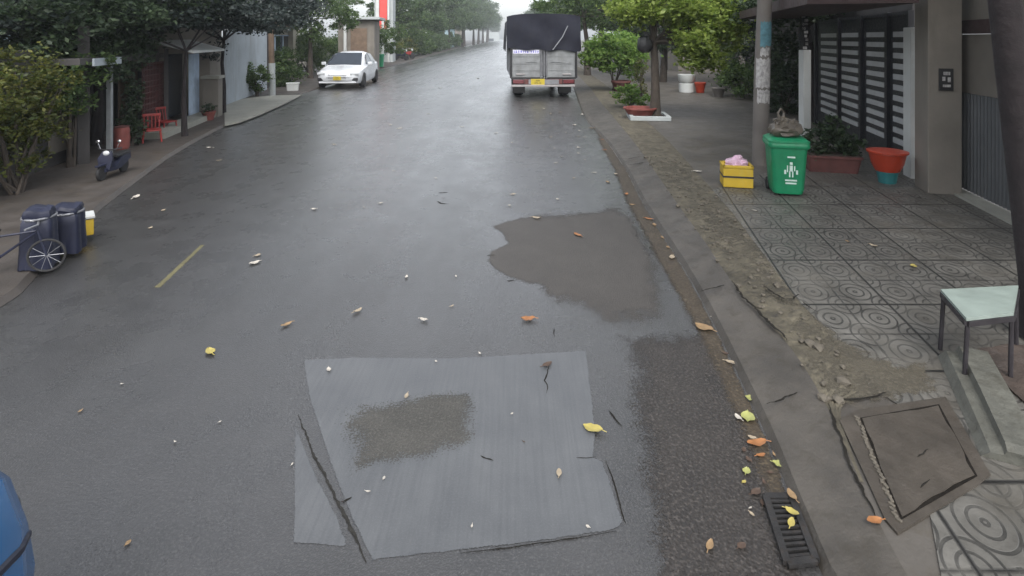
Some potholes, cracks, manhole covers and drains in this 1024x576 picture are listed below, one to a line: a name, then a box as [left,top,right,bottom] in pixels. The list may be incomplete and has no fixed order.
manhole cover [840,397,990,536]
drain grate [762,492,820,569]
crack [463,456,626,553]
